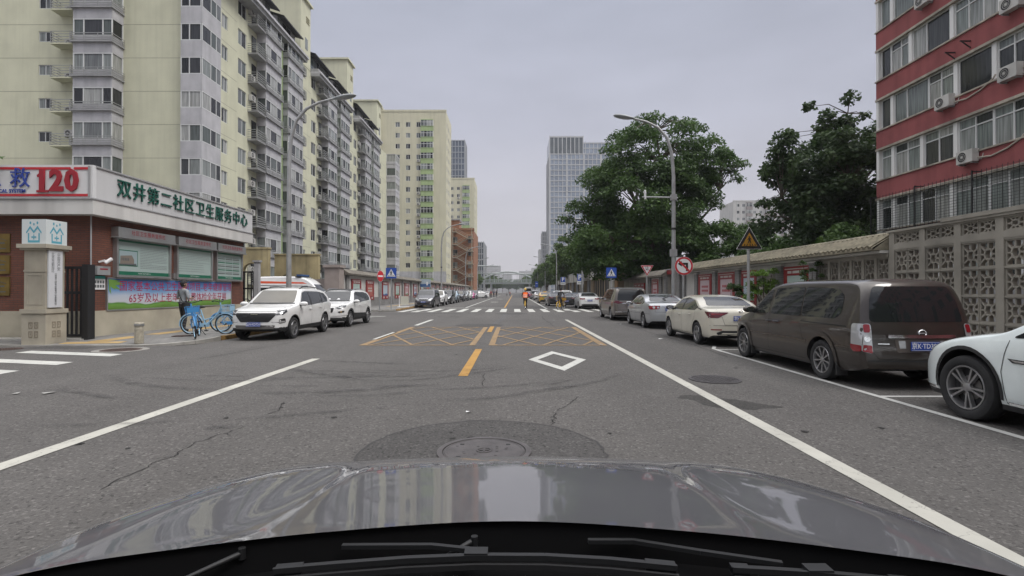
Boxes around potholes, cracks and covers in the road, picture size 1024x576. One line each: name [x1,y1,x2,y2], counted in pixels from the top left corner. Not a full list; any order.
manhole cover [437,437,531,458]
manhole cover [689,375,742,384]
crack [100,426,246,490]
